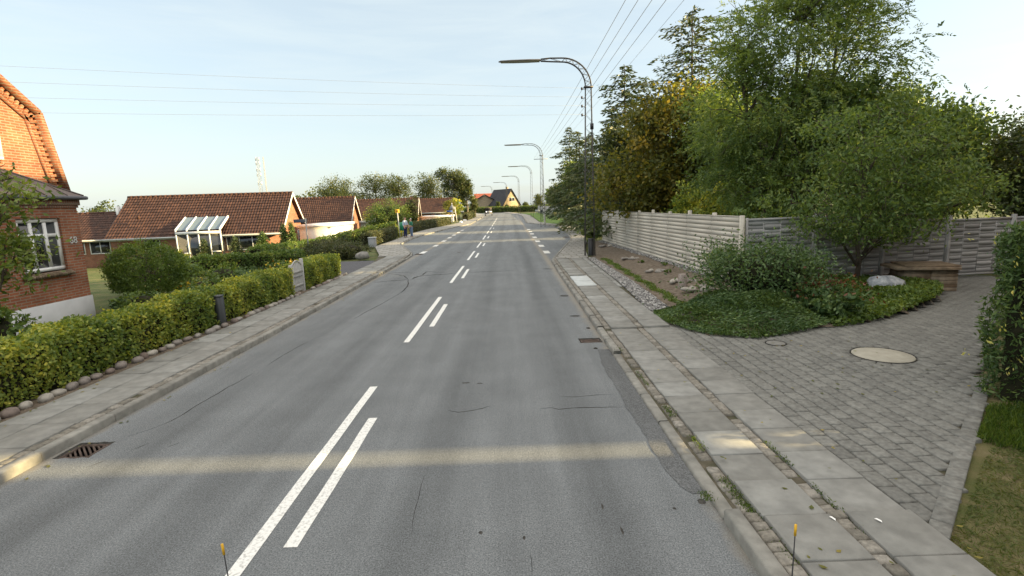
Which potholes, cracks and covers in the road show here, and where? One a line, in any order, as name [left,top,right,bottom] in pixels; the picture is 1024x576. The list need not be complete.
drain grate [53,441,116,459]
manhole cover [850,347,918,364]
crack [134,375,250,435]
crack [542,394,606,410]
crack [356,271,491,318]
